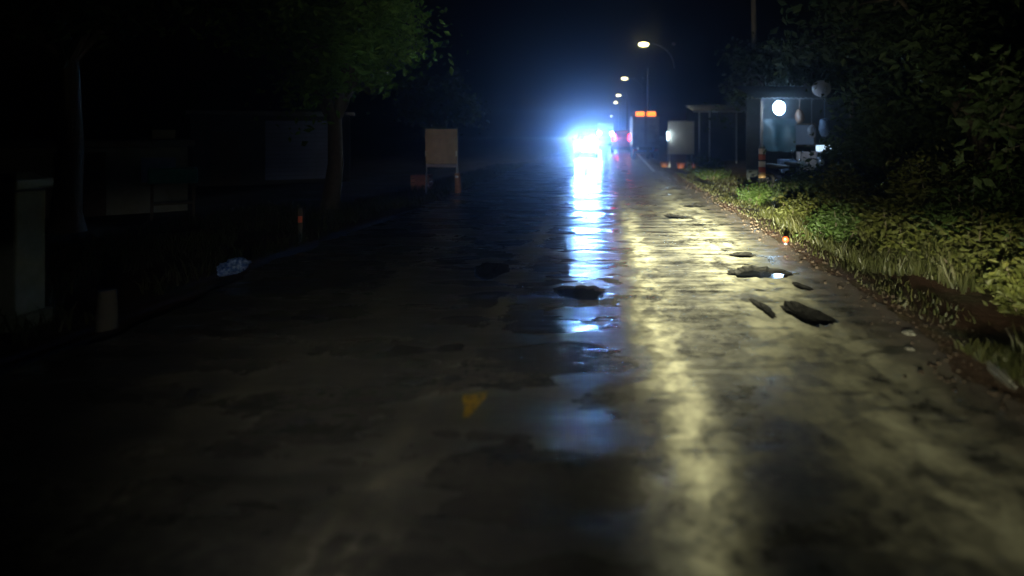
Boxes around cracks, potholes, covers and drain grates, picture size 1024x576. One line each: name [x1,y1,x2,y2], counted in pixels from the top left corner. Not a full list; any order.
pothole [749,298,777,319]
pothole [726,265,793,279]
pothole [474,262,511,280]
pothole [553,285,606,300]
pothole [779,300,839,327]
